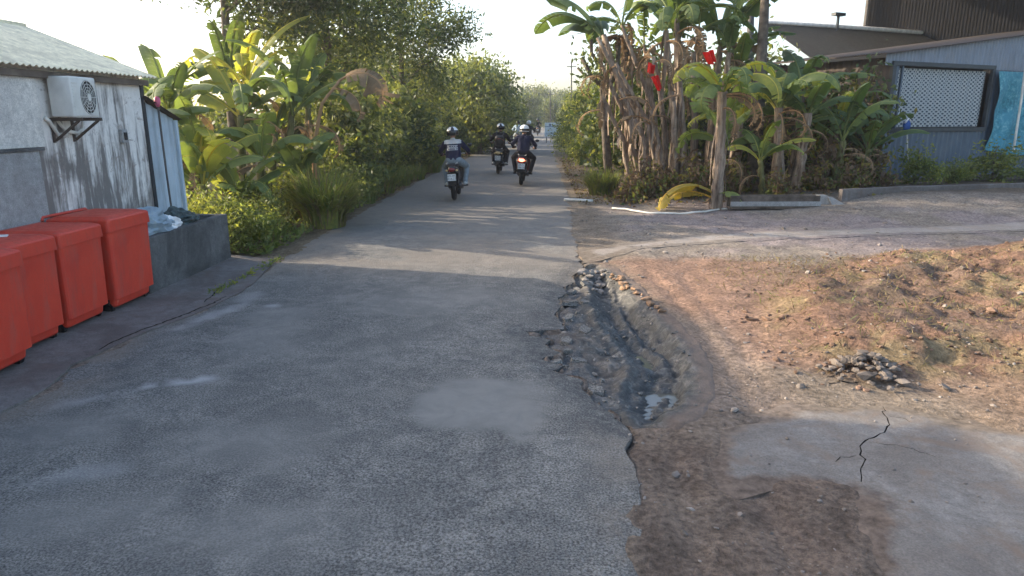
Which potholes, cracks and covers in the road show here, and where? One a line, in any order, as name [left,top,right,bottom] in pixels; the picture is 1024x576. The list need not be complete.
crack [99,285,224,350]
pothole [538,264,715,430]
crack [835,407,935,482]
